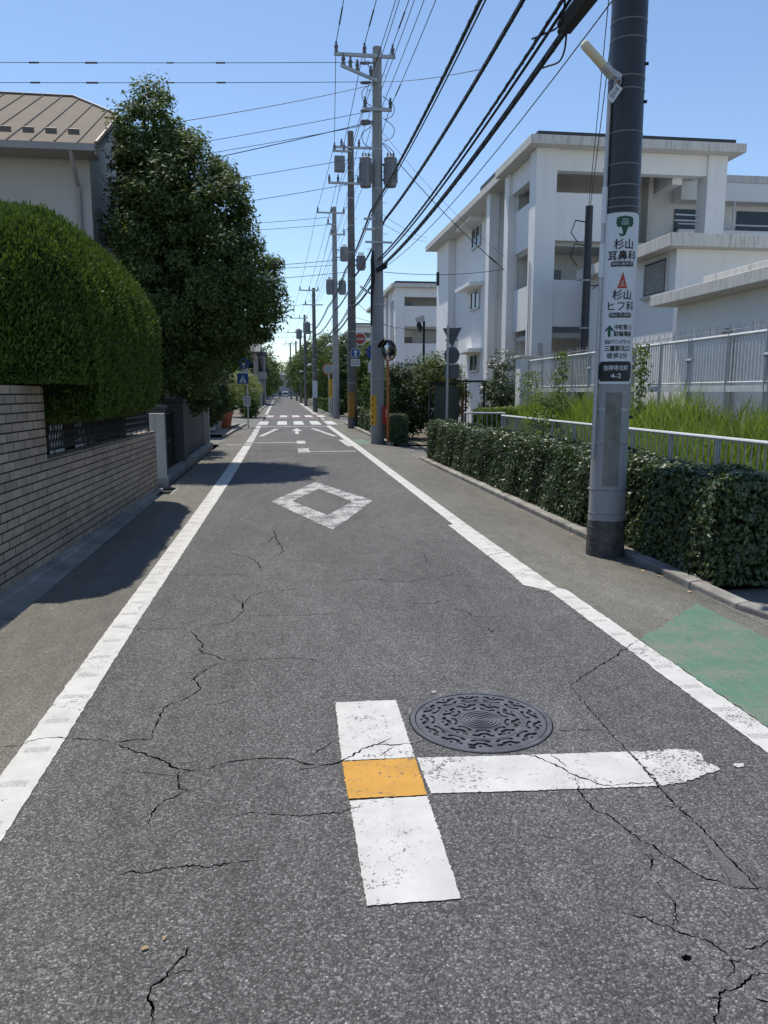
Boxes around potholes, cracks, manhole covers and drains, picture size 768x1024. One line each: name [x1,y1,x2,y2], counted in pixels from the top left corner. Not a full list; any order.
crack [3,586,421,824]
crack [518,753,768,1024]
crack [120,860,256,875]
crack [146,943,198,1024]
manhole cover [410,692,553,754]
